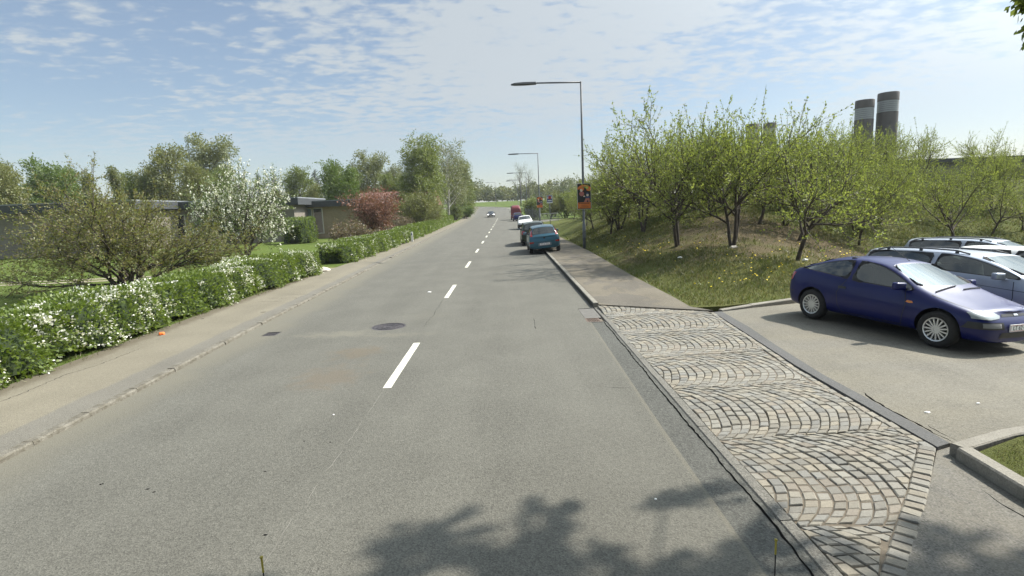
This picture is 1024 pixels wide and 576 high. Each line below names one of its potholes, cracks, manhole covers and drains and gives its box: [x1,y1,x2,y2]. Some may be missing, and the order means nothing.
crack [264,391,383,563]
